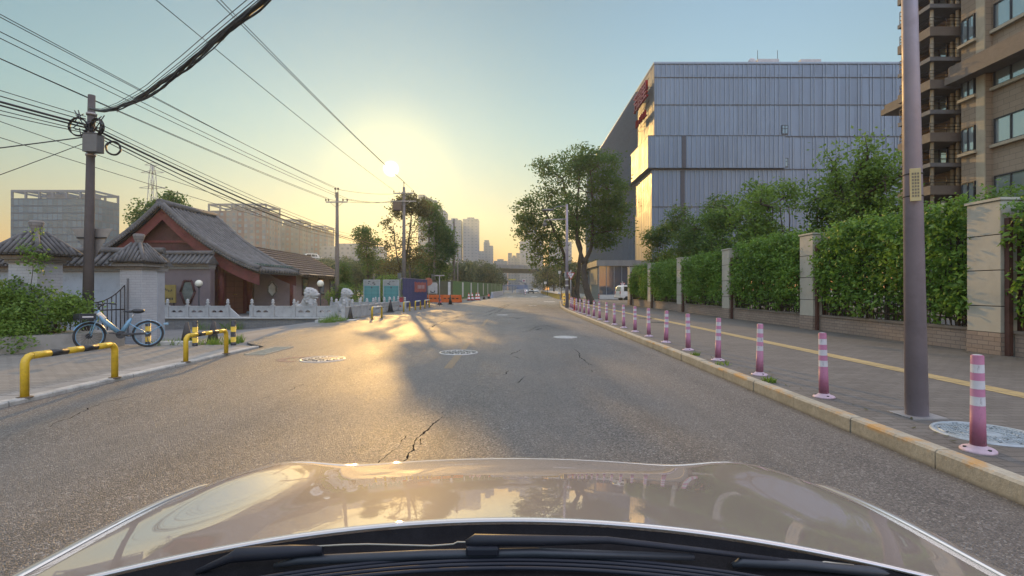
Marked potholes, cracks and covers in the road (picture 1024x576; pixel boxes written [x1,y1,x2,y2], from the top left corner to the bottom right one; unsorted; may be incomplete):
drain grate [243,347,293,355]
crack [378,411,444,463]
manhole cover [929,421,1024,447]
